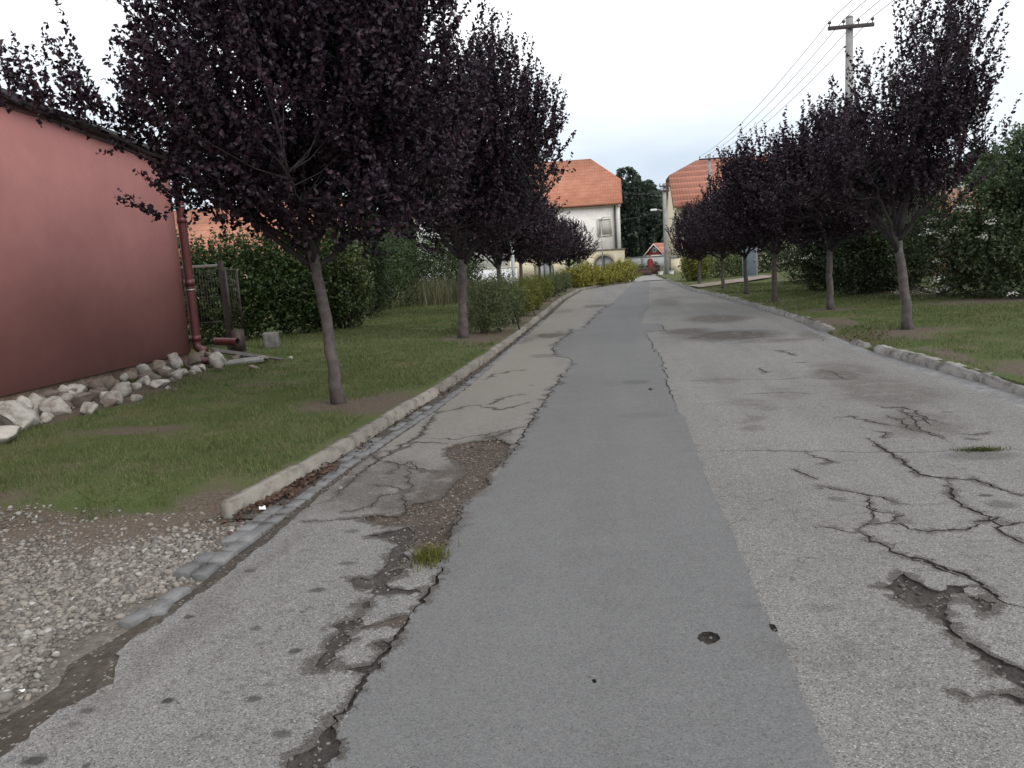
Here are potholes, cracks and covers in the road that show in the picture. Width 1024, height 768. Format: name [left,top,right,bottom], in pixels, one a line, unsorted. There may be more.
pothole [697,632,720,645]
crack [330,331,573,521]
pothole [363,440,511,551]
crack [793,406,1024,607]
crack [329,567,444,730]
pothole [883,572,1024,689]
